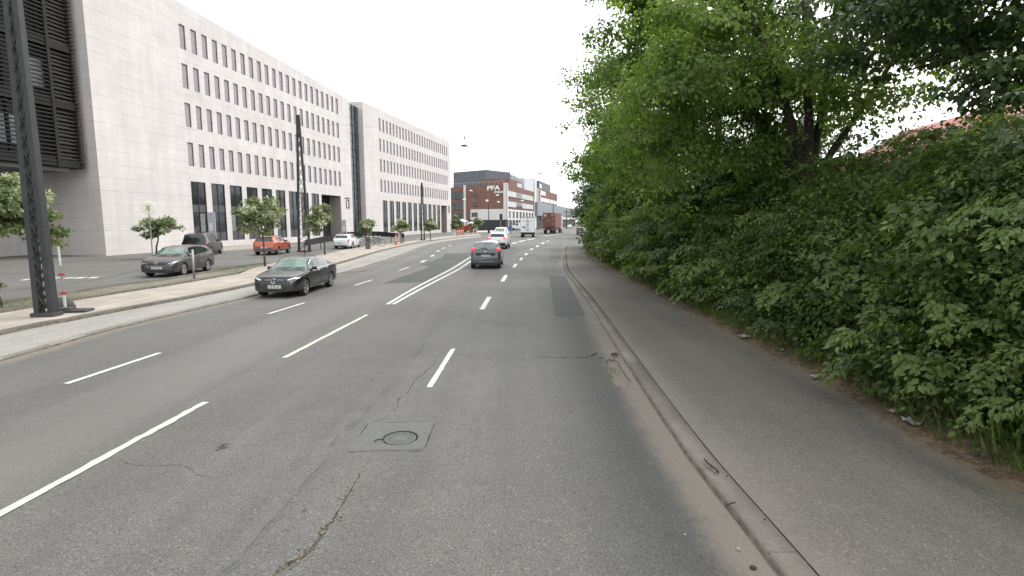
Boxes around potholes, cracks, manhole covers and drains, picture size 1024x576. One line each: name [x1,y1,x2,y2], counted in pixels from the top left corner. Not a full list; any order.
crack [270,457,372,576]
pothole [606,359,630,387]
manhole cover [383,431,418,445]
